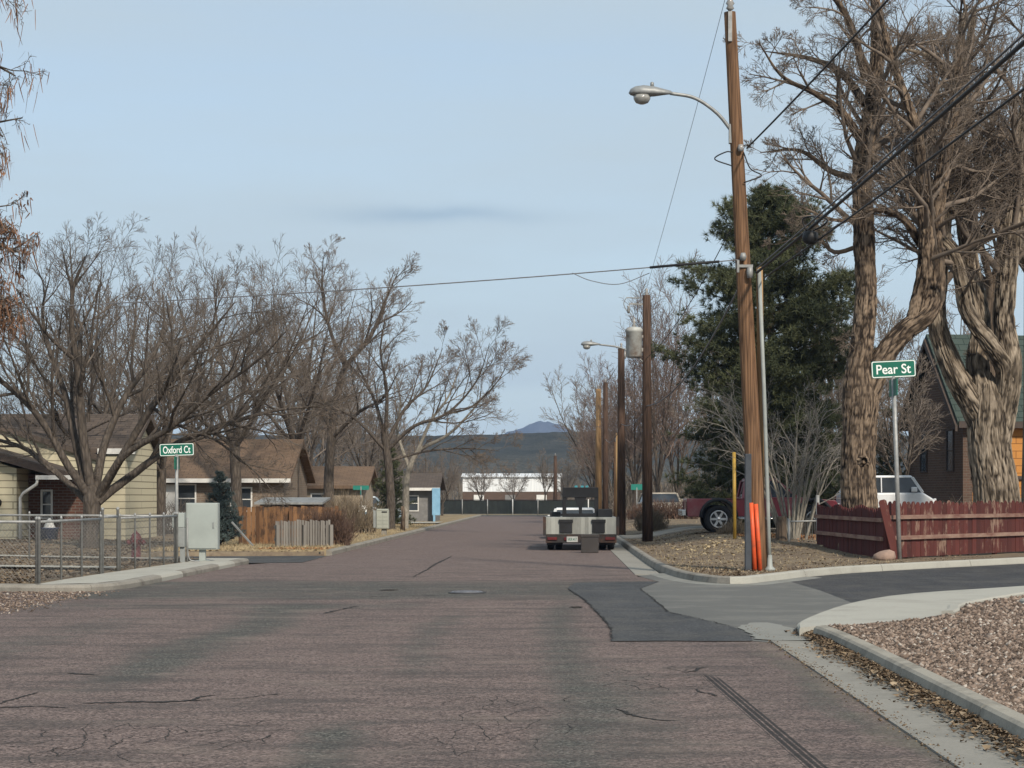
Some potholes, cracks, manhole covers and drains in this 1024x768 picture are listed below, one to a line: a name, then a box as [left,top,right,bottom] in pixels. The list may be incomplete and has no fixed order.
crack [3,720,285,763]
crack [87,693,280,703]
crack [616,708,680,721]
crack [398,696,578,756]
crack [2,692,66,708]
crack [602,666,722,696]
